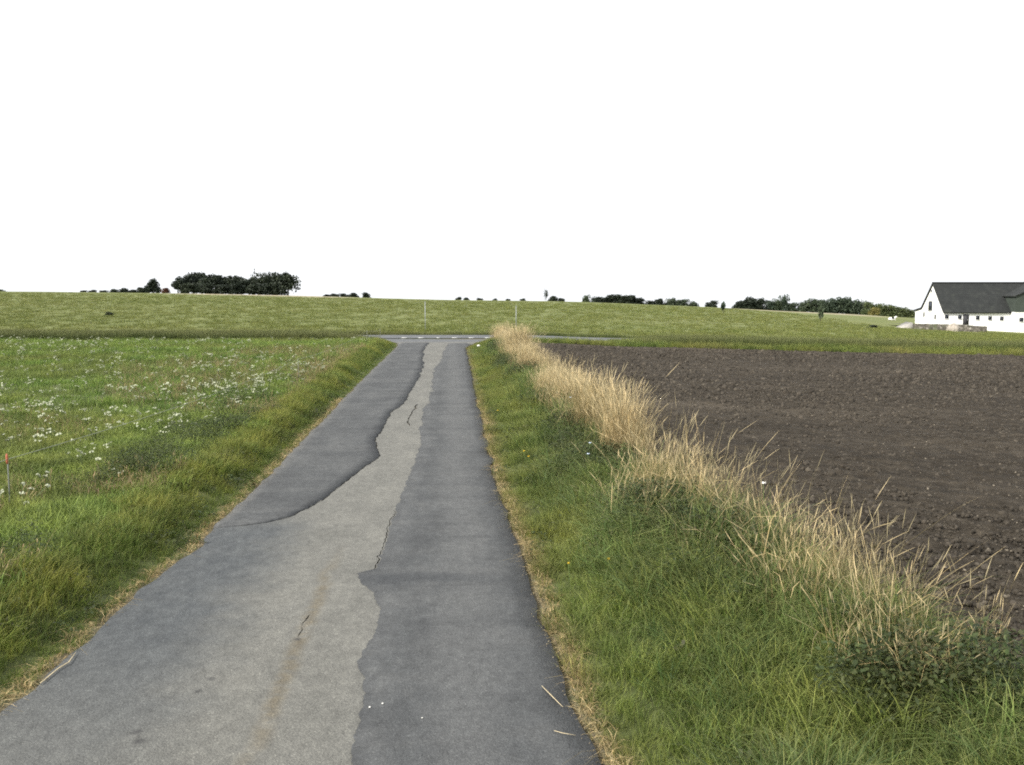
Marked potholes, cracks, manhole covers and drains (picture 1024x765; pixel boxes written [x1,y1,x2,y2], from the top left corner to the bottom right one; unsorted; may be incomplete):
crack [242,393,418,526]
